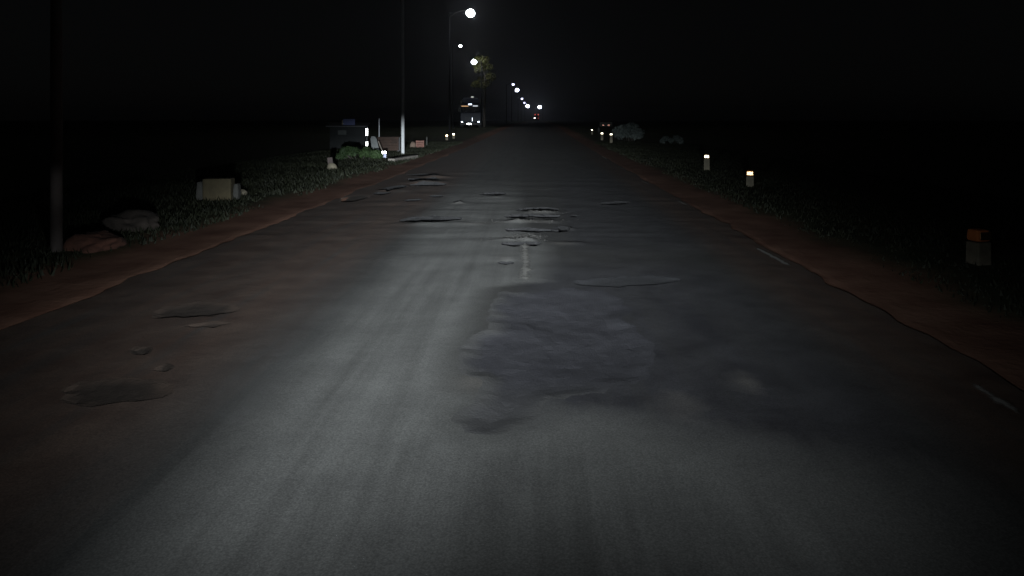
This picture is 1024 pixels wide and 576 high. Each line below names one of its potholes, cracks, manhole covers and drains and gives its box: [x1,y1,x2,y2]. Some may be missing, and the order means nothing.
pothole [151,363,175,372]
pothole [129,346,153,355]
pothole [152,300,240,318]
pothole [60,376,174,407]
pothole [182,320,231,328]
